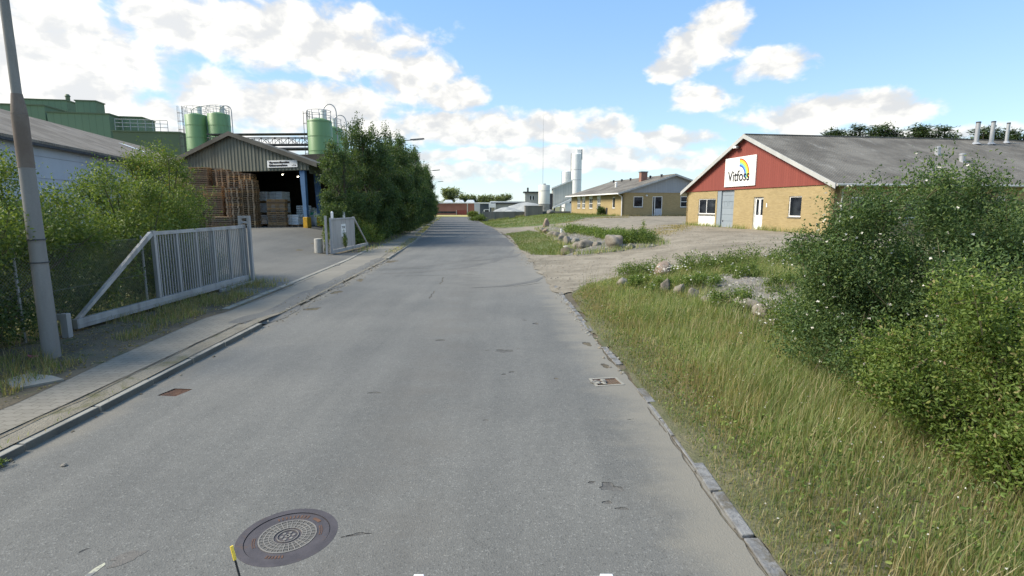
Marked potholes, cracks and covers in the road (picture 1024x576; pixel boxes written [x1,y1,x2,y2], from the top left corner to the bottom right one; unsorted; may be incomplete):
drain grate [589,377,625,387]
manhole cover [234,509,338,567]
